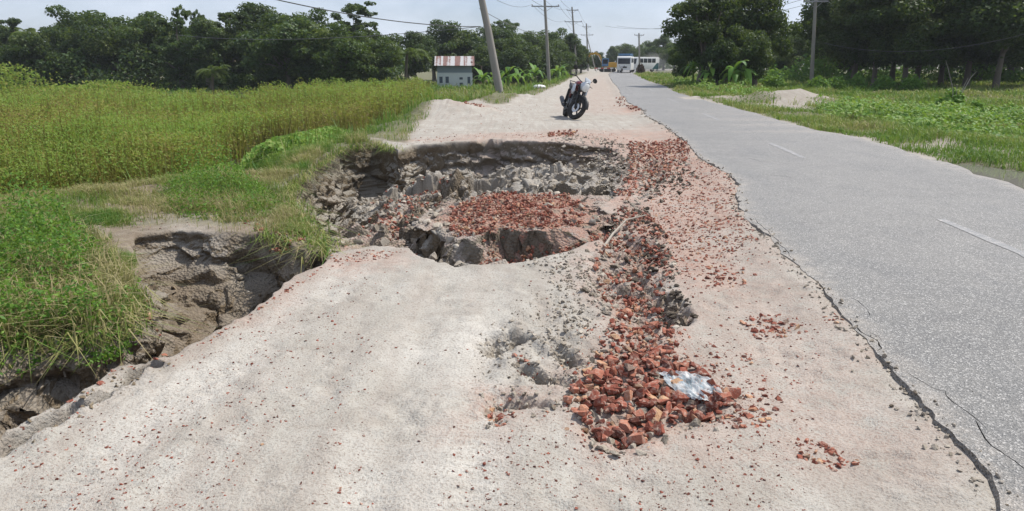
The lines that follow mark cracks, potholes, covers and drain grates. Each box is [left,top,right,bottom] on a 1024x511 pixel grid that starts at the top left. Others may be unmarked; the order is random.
crack [908,373,1024,468]
pothole [0,139,637,458]
